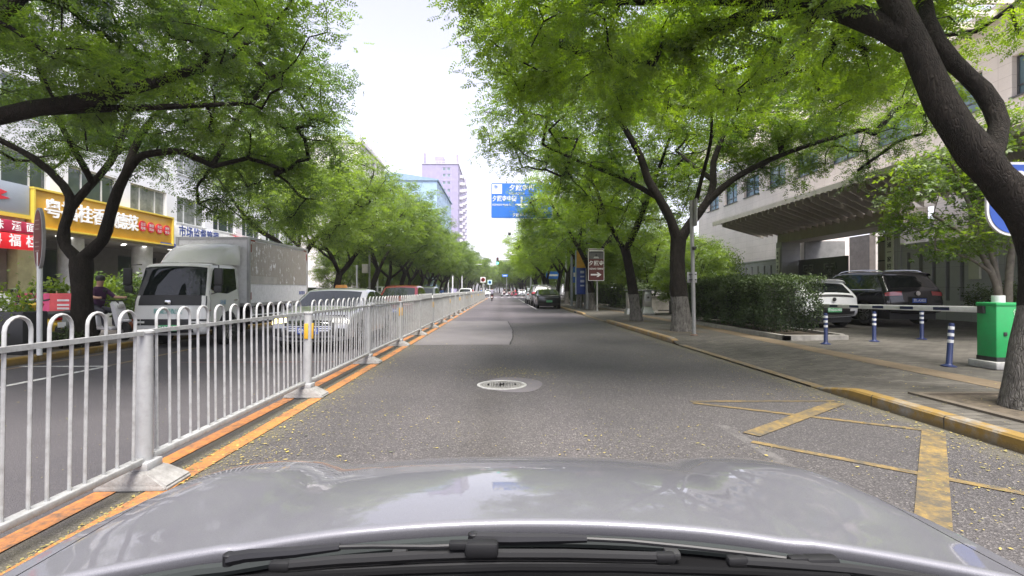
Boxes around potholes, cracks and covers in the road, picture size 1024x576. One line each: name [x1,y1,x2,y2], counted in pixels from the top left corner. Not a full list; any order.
manhole cover [477,380,527,390]
